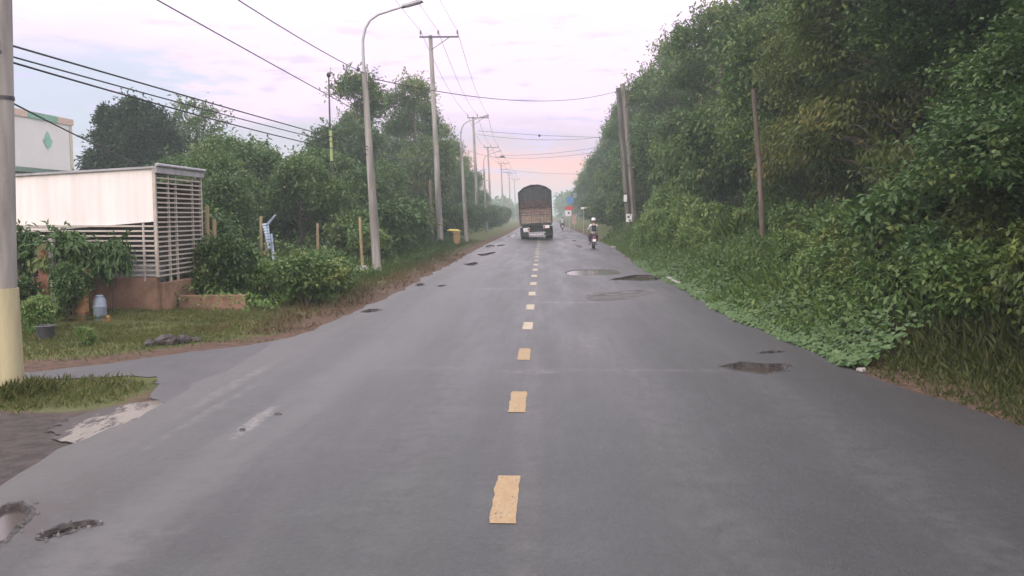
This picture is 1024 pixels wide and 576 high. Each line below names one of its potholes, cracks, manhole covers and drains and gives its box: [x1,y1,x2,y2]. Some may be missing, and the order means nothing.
pothole [714,361,796,375]
pothole [0,500,40,543]
pothole [34,519,104,543]
